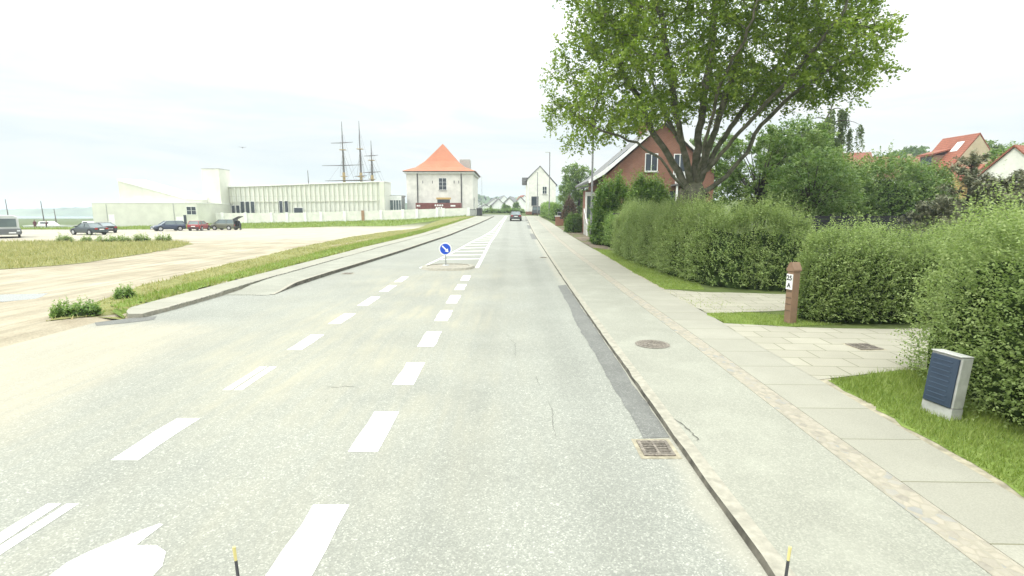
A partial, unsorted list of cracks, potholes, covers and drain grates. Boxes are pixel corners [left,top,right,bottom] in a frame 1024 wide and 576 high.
manhole cover [635,340,670,348]
drain grate [631,439,682,459]
